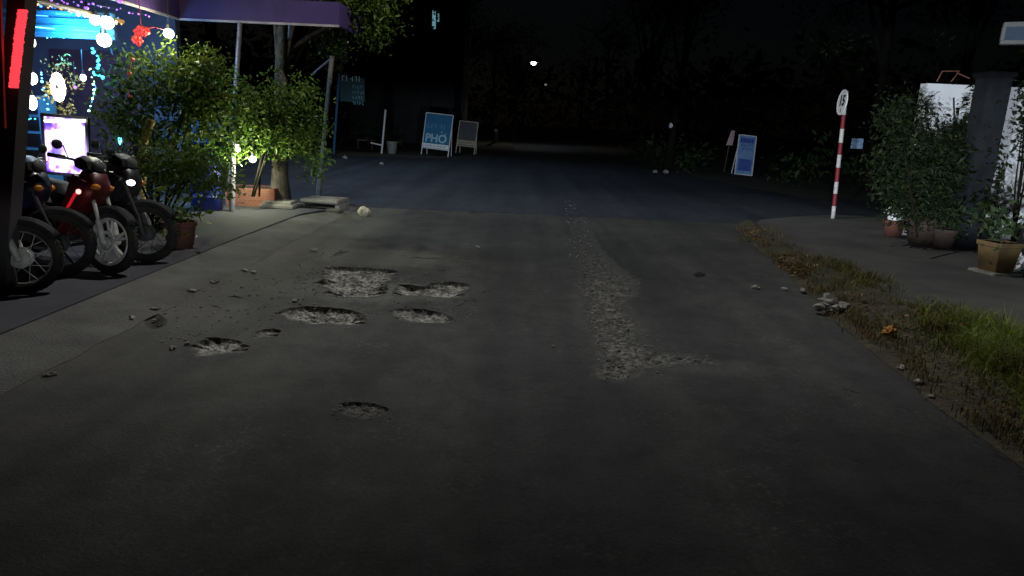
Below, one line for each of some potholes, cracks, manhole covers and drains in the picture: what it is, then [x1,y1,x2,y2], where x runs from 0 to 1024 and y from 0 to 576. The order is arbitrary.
pothole [188,337,250,358]
pothole [312,266,399,298]
pothole [389,308,455,324]
pothole [273,306,368,326]
pothole [250,329,281,339]
pothole [143,314,167,329]
pothole [337,402,390,420]
pothole [392,282,472,298]
